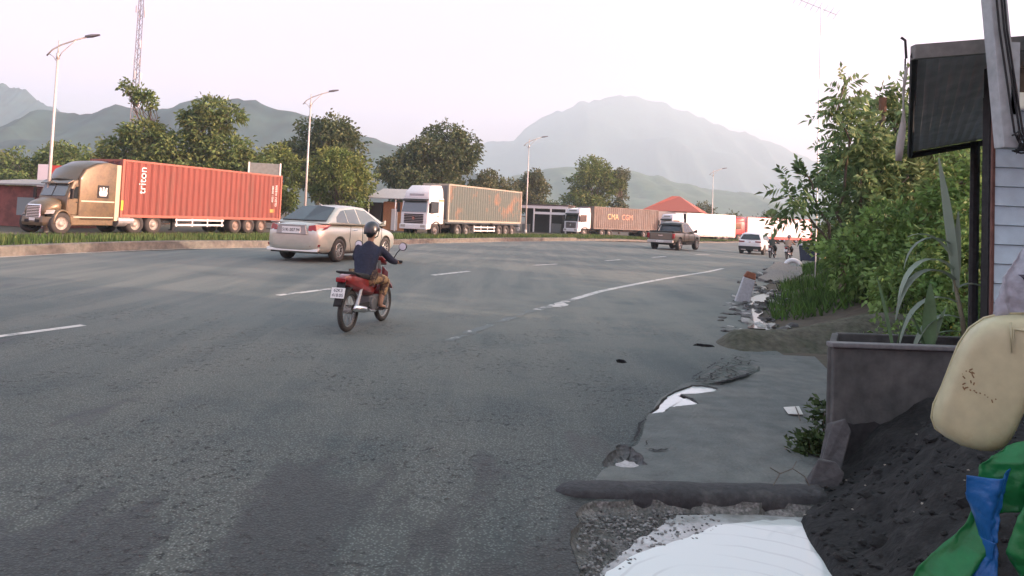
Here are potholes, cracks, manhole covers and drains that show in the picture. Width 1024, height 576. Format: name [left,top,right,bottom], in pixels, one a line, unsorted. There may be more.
pothole [602,444,647,467]
pothole [648,385,718,414]
crack [632,416,669,451]
